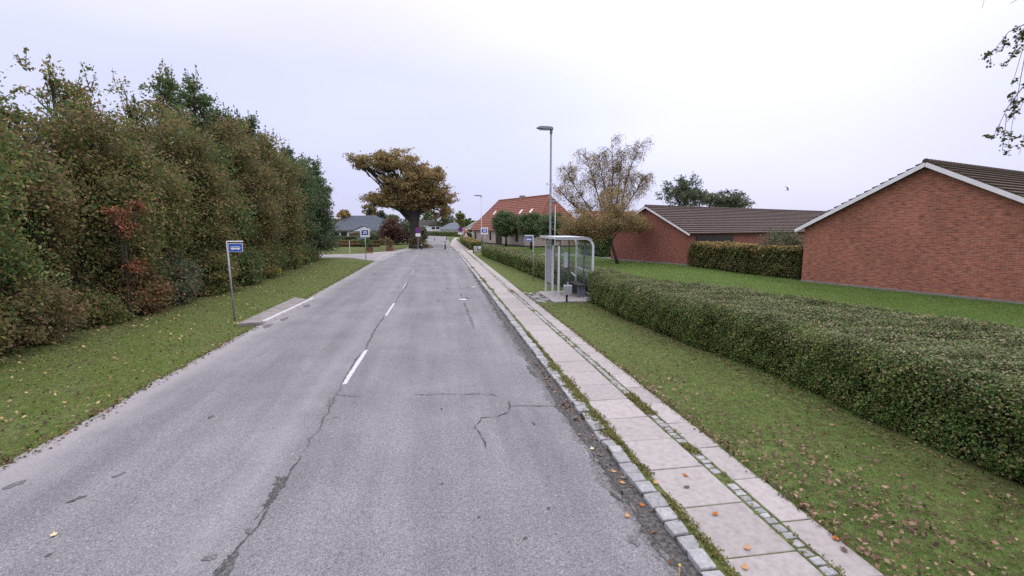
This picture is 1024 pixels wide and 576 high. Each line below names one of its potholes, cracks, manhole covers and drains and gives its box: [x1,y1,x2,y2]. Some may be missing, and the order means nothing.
crack [420,286,687,576]
